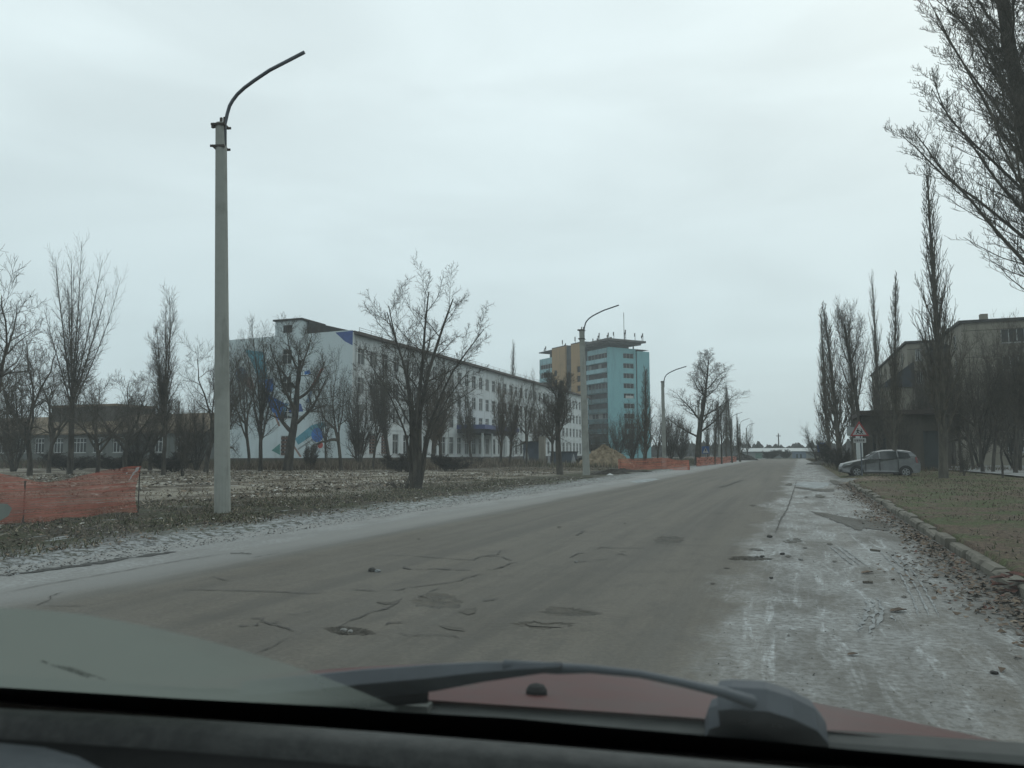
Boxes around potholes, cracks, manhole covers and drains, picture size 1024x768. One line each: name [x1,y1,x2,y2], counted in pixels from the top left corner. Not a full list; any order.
crack [338,550,513,638]
crack [239,611,307,652]
pothole [710,554,791,564]
